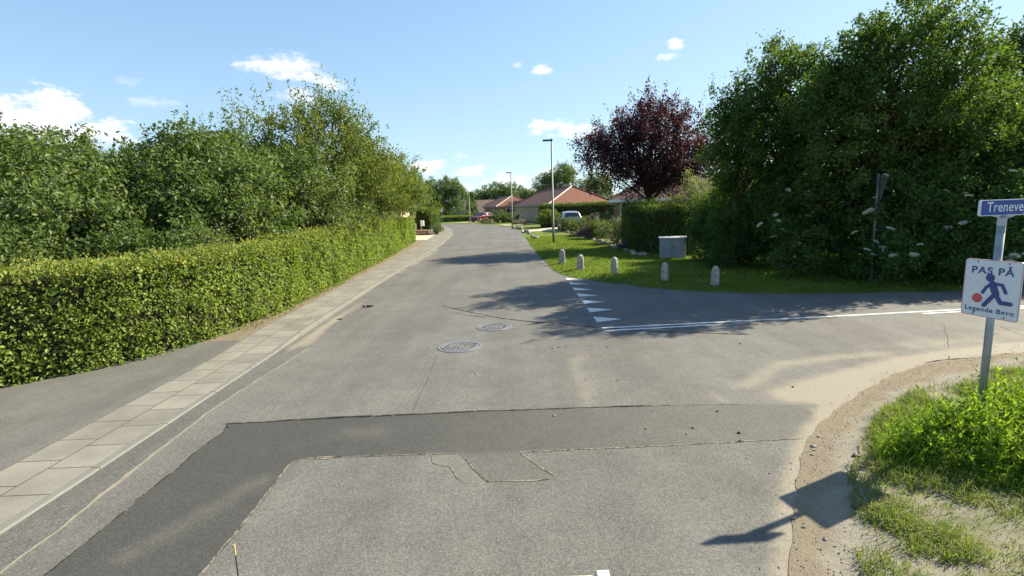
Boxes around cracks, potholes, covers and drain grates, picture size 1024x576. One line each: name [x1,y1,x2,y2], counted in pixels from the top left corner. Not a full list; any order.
manhole cover [438,340,482,353]
crack [0,346,802,576]
crack [925,327,1020,363]
manhole cover [477,323,512,331]
